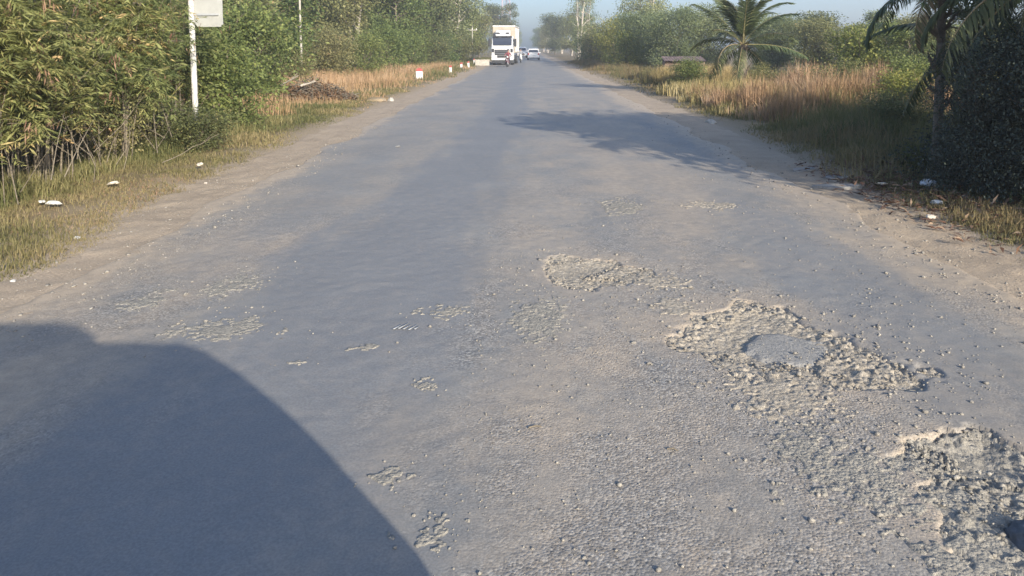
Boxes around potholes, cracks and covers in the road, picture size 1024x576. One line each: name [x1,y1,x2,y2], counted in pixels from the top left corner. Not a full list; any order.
pothole [897,428,1024,513]
pothole [666,300,944,392]
pothole [543,255,652,292]
pothole [930,471,1024,531]
